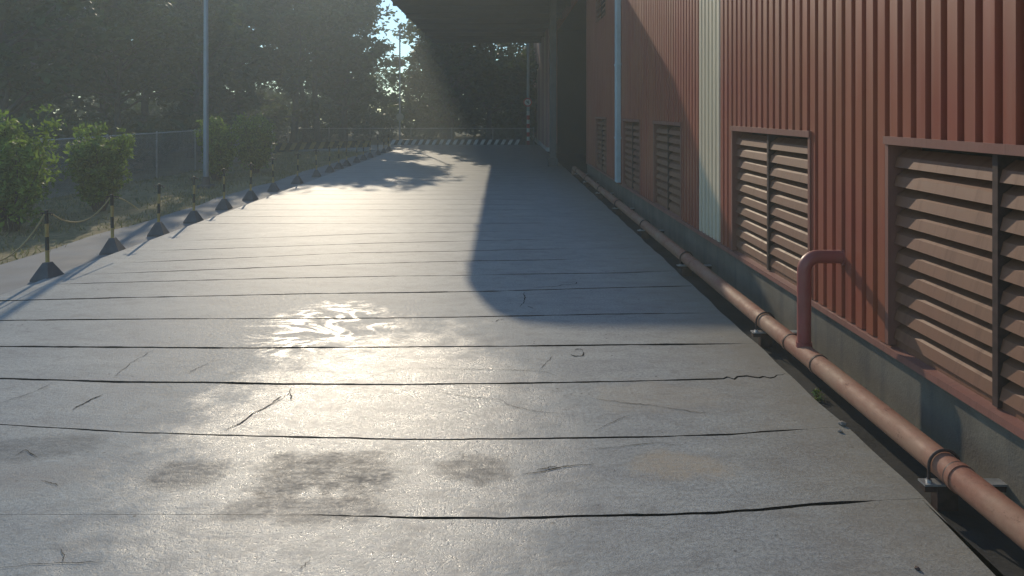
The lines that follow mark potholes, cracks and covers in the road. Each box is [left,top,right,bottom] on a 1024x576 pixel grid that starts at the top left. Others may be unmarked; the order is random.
crack [221,389,292,433]
crack [525,464,591,474]
